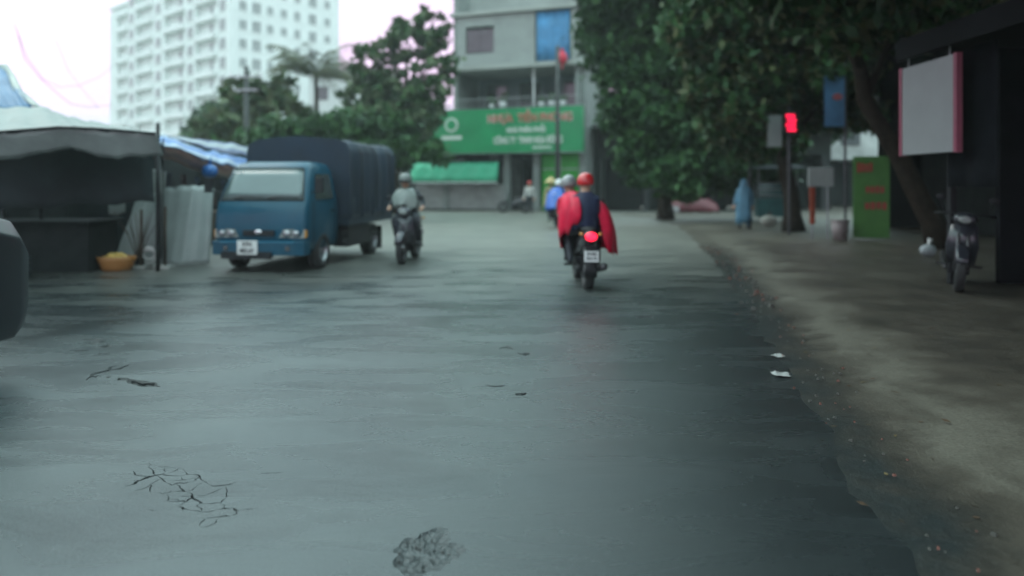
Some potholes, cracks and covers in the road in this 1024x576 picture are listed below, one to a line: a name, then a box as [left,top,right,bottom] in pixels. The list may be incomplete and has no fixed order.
pothole [393,527,466,576]
crack [484,385,527,396]
crack [70,339,161,387]
crack [125,464,249,528]
